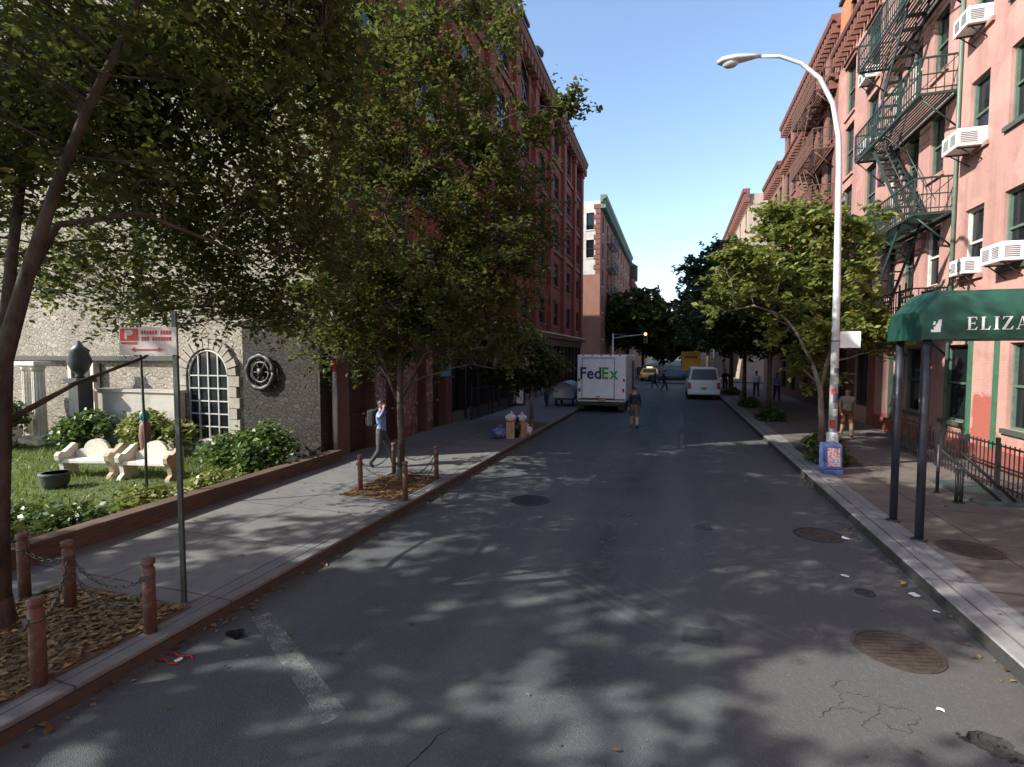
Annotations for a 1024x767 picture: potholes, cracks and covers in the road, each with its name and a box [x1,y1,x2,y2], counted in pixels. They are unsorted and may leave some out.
manhole cover [511,495,549,506]
manhole cover [851,629,948,674]
manhole cover [855,588,876,597]
manhole cover [793,527,845,543]
manhole cover [935,539,1007,560]
crack [406,726,453,767]
pothole [225,628,250,640]
crack [820,680,921,733]
